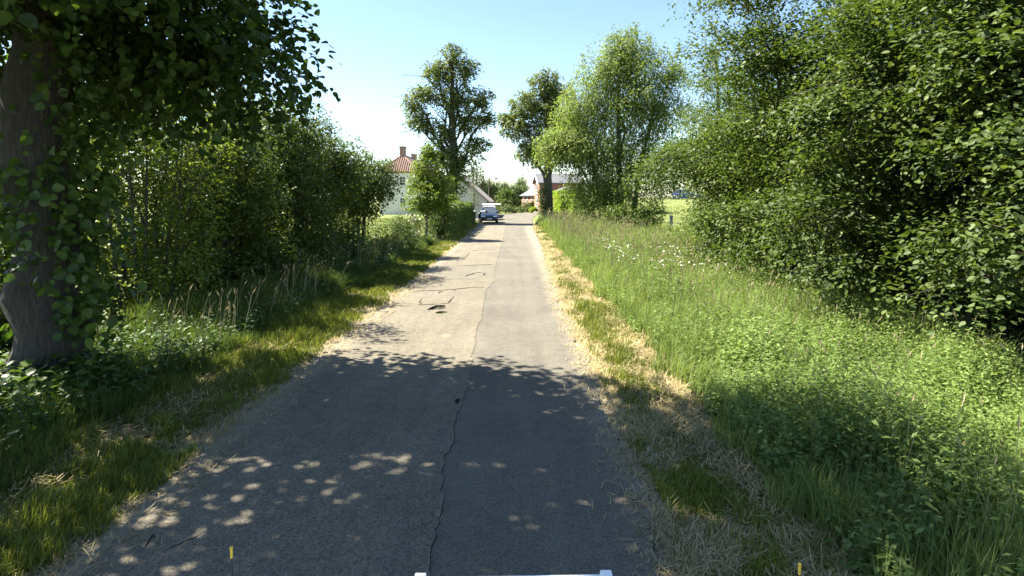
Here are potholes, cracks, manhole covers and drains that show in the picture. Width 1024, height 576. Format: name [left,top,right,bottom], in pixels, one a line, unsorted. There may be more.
crack [418,231,504,570]
